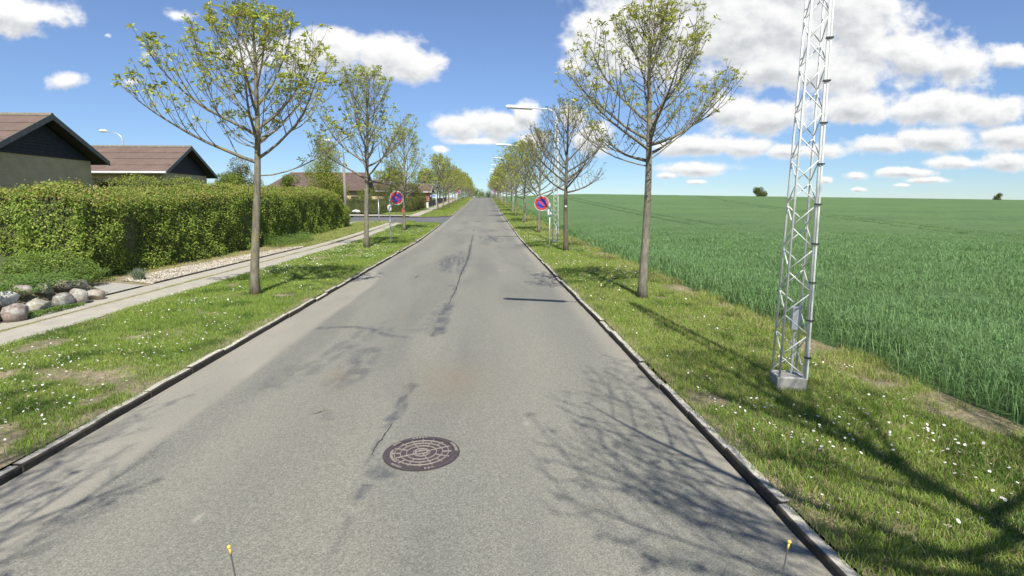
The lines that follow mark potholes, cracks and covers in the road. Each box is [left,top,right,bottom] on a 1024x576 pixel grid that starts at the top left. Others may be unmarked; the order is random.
manhole cover [382,436,460,471]
